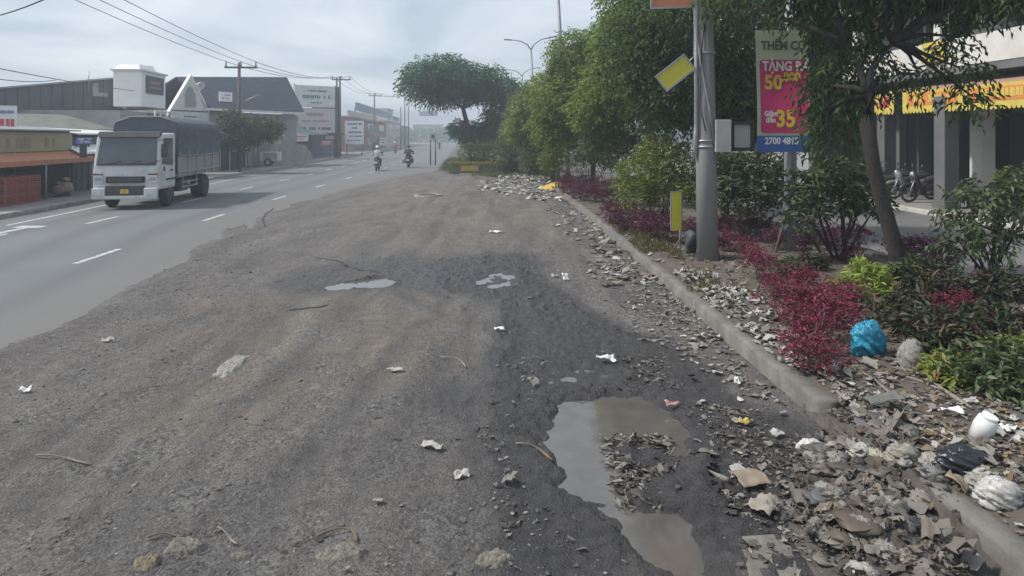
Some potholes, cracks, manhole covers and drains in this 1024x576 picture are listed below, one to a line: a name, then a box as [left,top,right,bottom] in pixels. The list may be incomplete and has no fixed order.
pothole [313,274,404,292]
crack [316,257,380,273]
pothole [460,266,527,291]
pothole [508,382,741,576]
